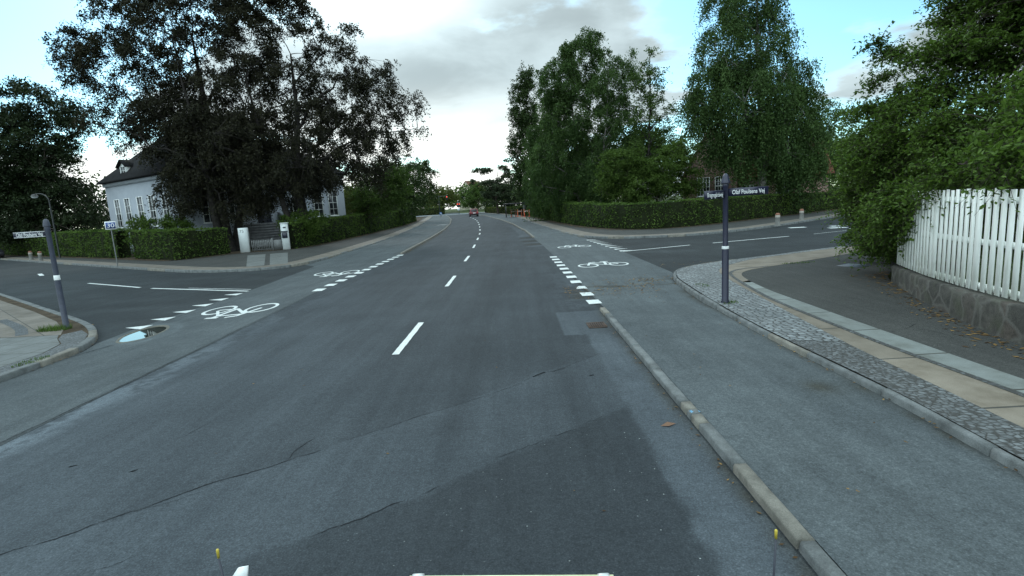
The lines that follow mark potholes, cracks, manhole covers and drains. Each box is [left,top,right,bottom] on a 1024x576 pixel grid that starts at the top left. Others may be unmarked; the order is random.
crack [315,485,441,535]
pothole [116,325,170,343]
